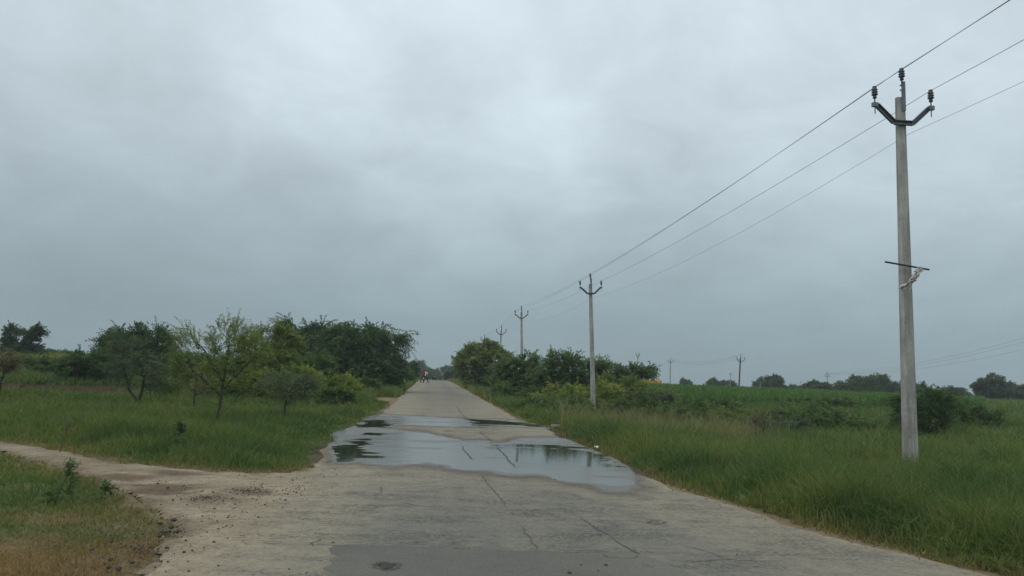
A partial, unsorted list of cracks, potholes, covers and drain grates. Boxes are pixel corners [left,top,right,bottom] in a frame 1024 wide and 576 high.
pothole [371,561,403,571]
crack [456,406,514,508]
crack [558,503,667,566]
